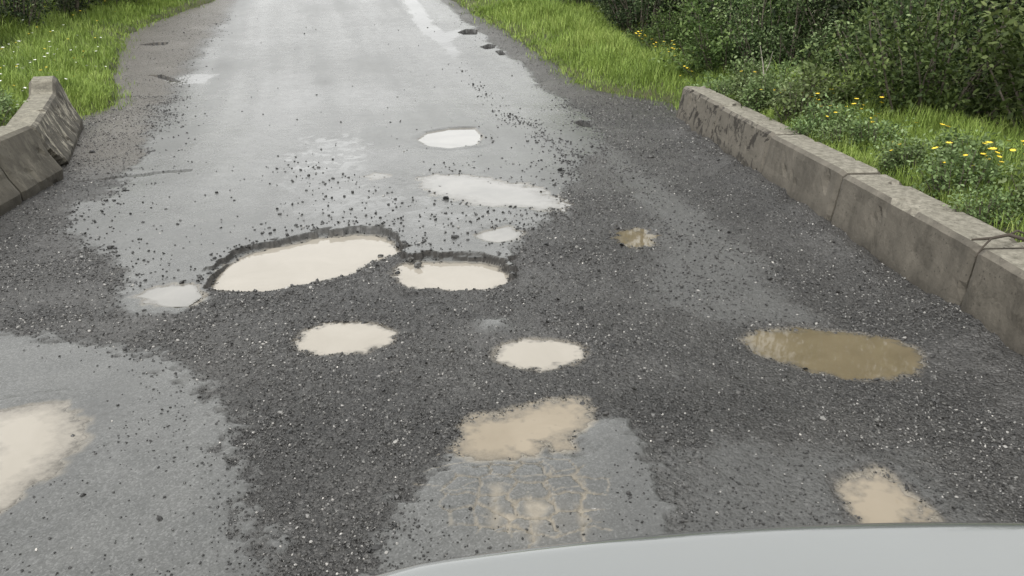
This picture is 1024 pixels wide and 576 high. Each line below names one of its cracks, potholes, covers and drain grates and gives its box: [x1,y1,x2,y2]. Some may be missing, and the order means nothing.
pothole [381,251,518,294]
crack [411,456,618,548]
pothole [726,321,939,386]
pothole [0,394,108,521]
pothole [284,316,404,359]
pothole [407,172,578,214]
pothole [605,225,664,250]
pothole [480,333,598,376]
pothole [823,459,957,524]
pothole [412,126,489,148]
pothole [436,392,604,468]
pothole [201,226,409,294]
